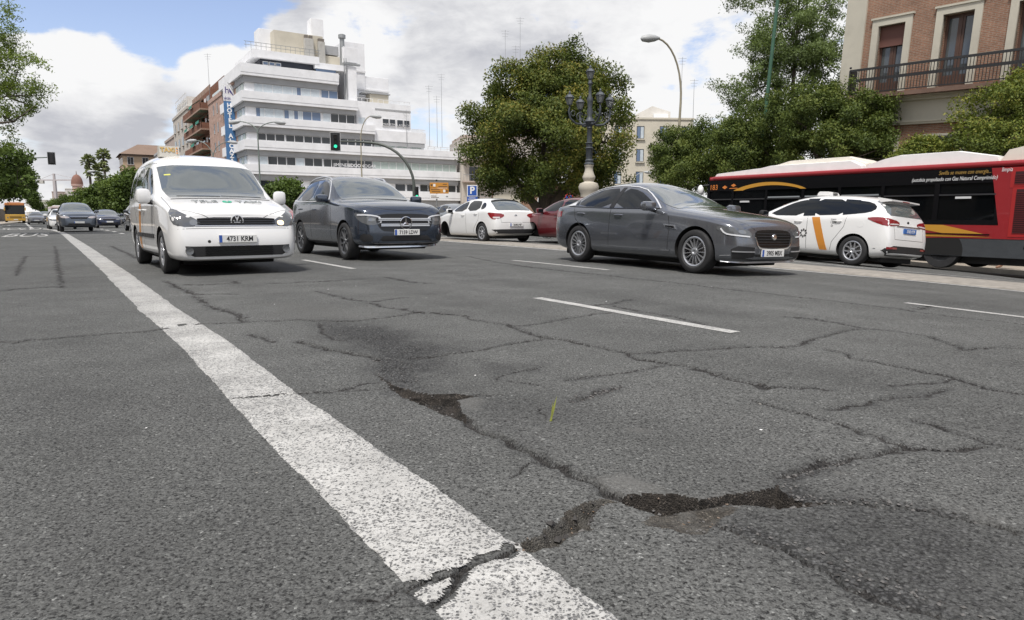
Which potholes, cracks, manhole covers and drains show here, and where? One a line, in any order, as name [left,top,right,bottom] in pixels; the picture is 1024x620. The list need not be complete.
crack [715,524,940,620]
pothole [378,376,473,424]
crack [0,279,1024,479]
crack [464,418,623,502]
crack [358,547,516,608]
crack [832,503,1018,536]
pothole [619,485,828,517]
